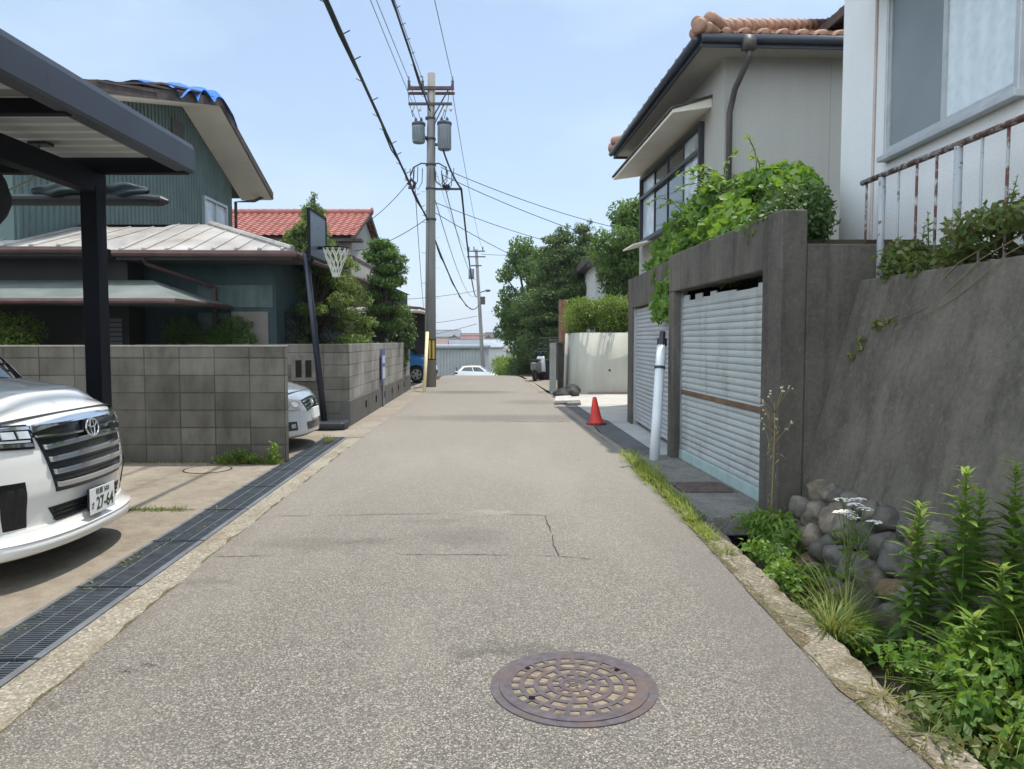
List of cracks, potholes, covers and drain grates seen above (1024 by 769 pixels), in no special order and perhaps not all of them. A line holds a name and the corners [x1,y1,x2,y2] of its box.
drain grate [271,455,323,470]
manhole cover [182,465,232,473]
drain grate [294,444,339,456]
drain grate [313,437,348,445]
drain grate [153,509,248,542]
drain grate [77,541,204,589]
drain grate [0,587,140,662]
manhole cover [491,651,658,728]
drain grate [205,486,280,510]
drain grate [242,469,304,487]
